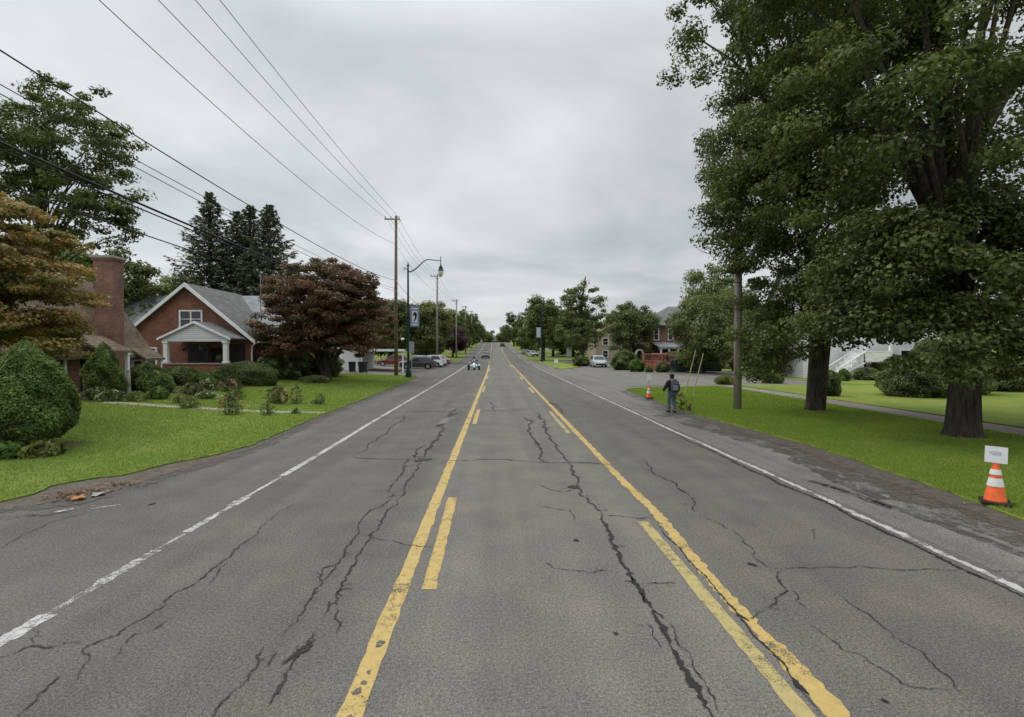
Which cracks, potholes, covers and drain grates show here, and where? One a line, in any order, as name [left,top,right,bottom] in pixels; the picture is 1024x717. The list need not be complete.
crack [212,403,1024,717]
crack [0,502,297,717]
